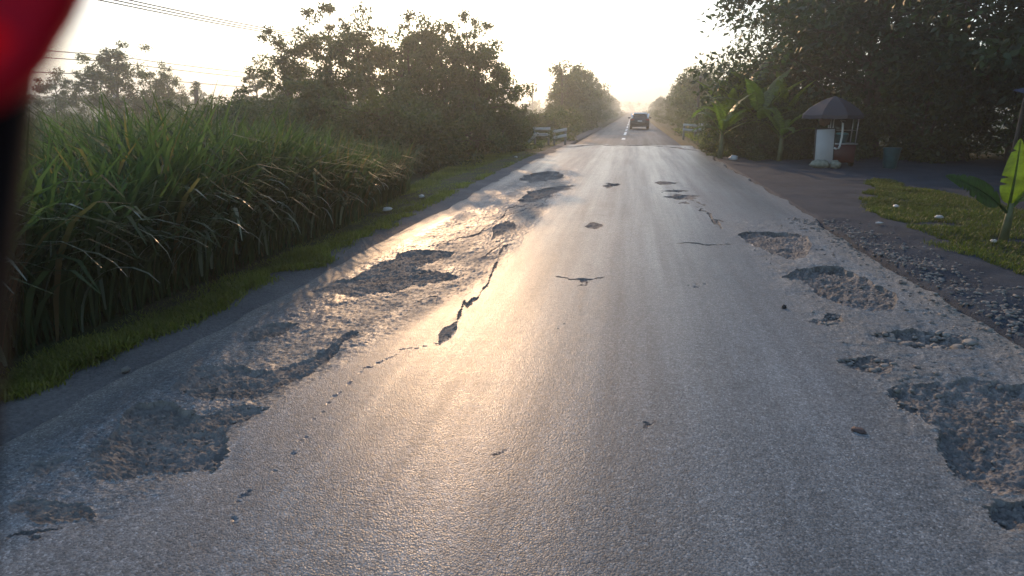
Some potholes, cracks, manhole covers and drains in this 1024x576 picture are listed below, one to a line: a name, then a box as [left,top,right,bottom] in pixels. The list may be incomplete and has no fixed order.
pothole [519,171,564,183]
pothole [241,322,299,343]
pothole [518,185,574,202]
pothole [170,330,359,401]
pothole [982,498,1024,532]
crack [437,199,547,320]
pothole [8,496,97,526]
pothole [489,221,516,242]
crack [677,199,731,246]
pothole [738,231,812,260]
pothole [780,265,899,311]
pothole [887,376,1024,496]
